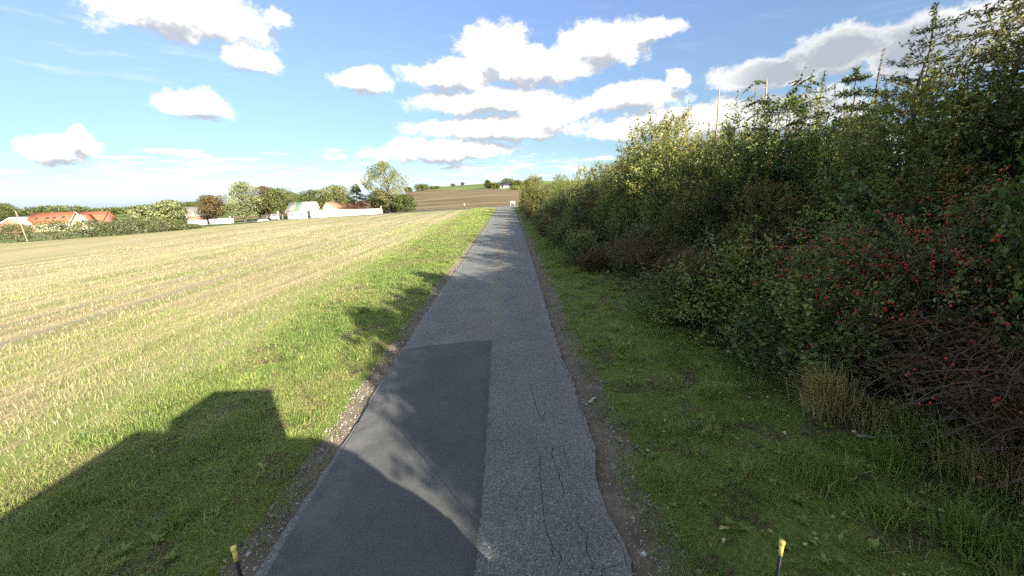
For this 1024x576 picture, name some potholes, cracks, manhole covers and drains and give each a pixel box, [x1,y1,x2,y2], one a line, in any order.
crack [539,449,568,573]
